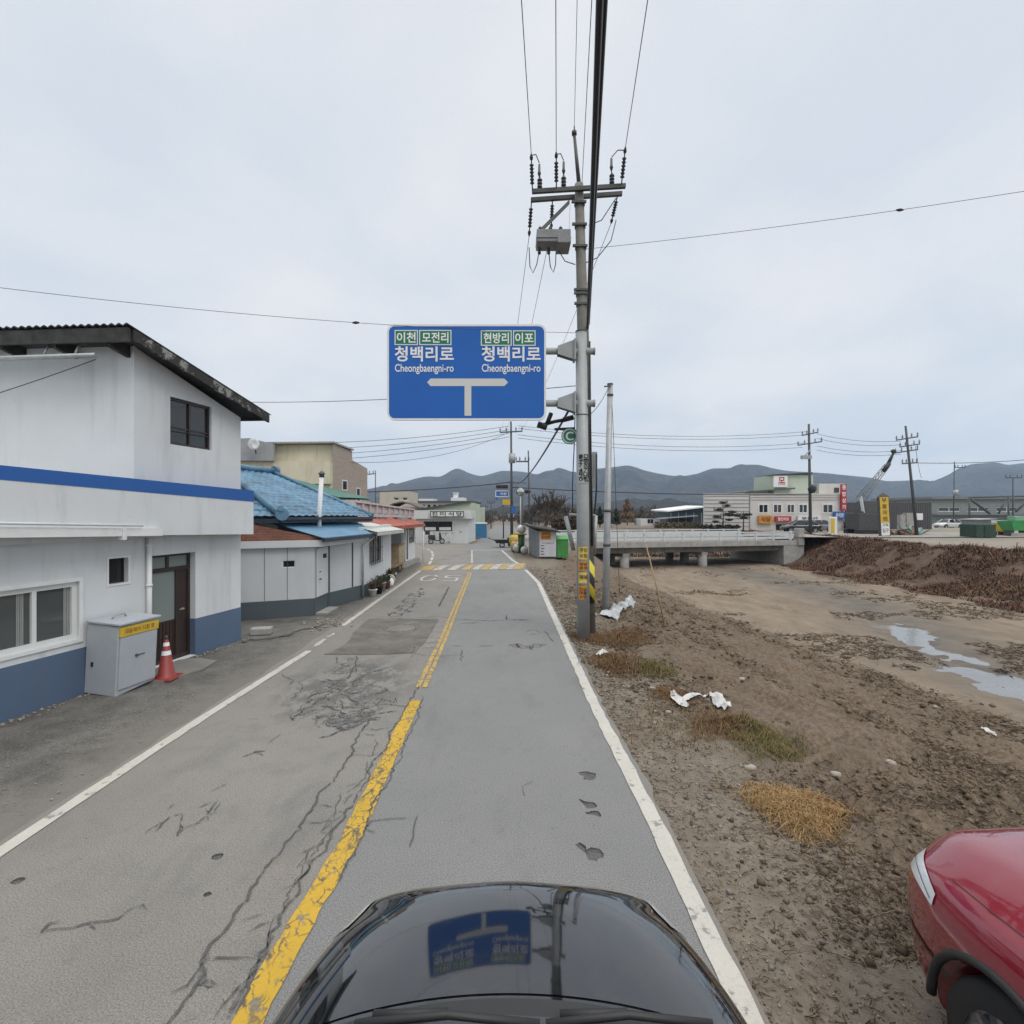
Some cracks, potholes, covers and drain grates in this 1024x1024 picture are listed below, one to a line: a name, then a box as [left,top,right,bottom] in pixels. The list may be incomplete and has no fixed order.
manhole cover [383,624,420,633]
pothole [576,842,604,861]
crack [372,587,552,661]
crack [166,656,423,1024]
pothole [579,771,596,780]
crack [41,904,147,931]
crack [146,783,228,835]
